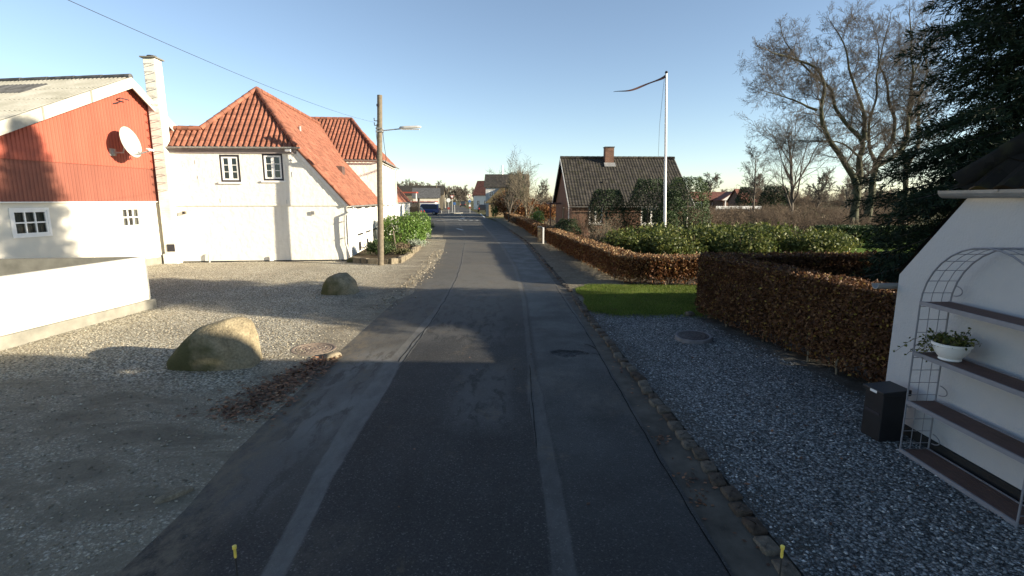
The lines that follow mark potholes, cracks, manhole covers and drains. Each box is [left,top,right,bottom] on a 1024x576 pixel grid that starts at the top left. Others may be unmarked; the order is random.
pothole [545,346,597,363]
crack [529,364,537,448]
manhole cover [291,342,336,355]
manhole cover [675,330,712,345]
